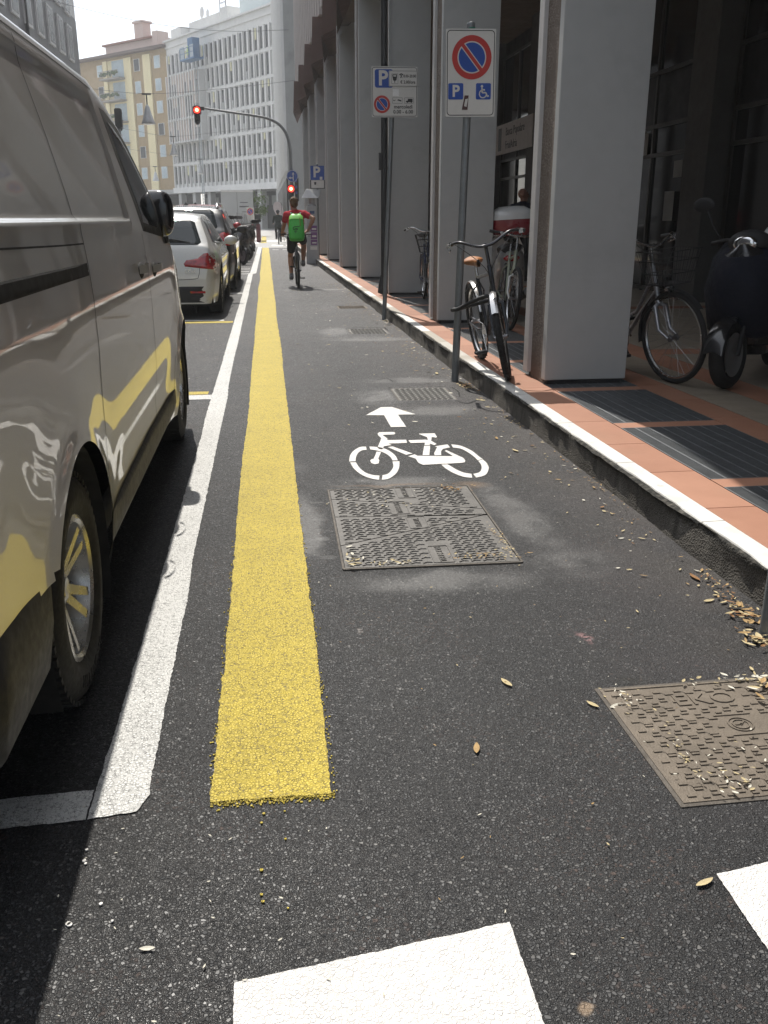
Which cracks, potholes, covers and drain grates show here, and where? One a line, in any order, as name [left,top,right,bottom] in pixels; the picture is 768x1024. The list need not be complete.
manhole cover [594,676,768,808]
manhole cover [327,485,523,571]
